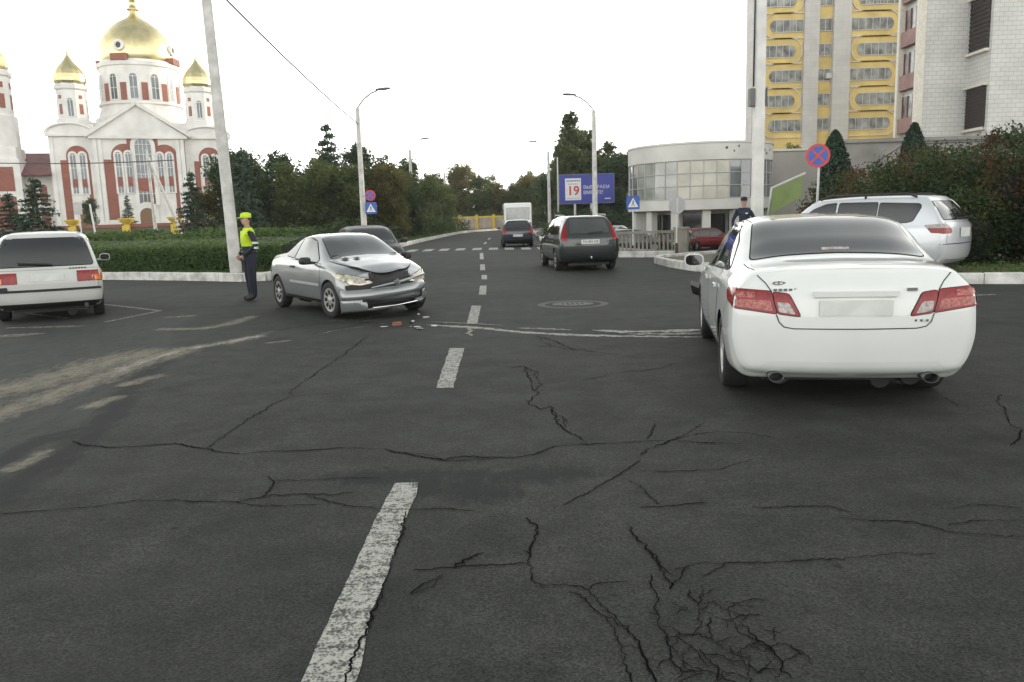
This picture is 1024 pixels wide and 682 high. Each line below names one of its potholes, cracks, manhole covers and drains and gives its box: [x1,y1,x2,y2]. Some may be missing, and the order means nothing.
crack [629,459,1023,537]
crack [944,394,1023,445]
manhole cover [538,300,608,308]
crack [2,476,935,682]
crack [73,336,738,461]
